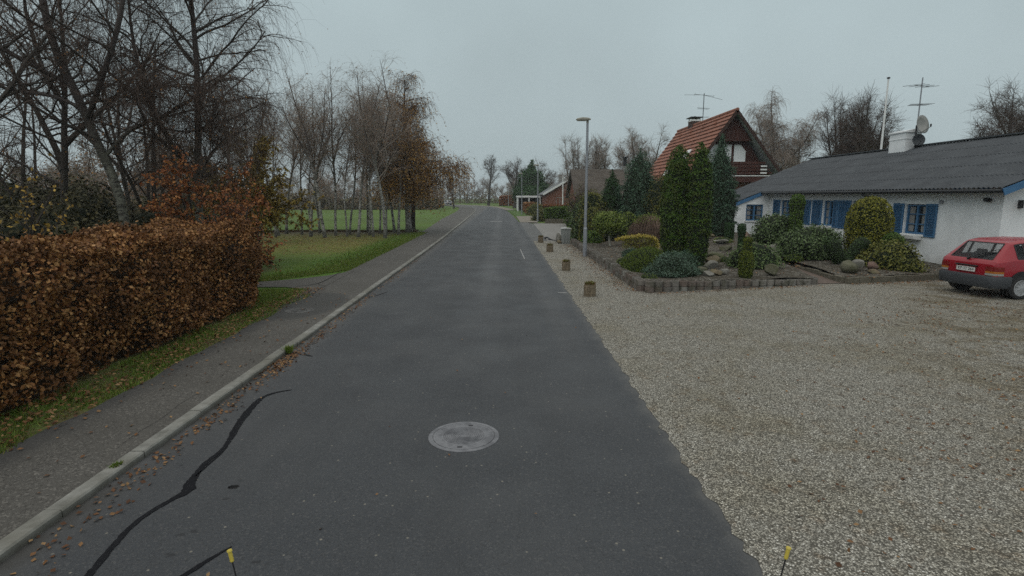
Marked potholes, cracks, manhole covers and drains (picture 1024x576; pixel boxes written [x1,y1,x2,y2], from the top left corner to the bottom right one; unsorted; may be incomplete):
manhole cover [428,422,499,452]
